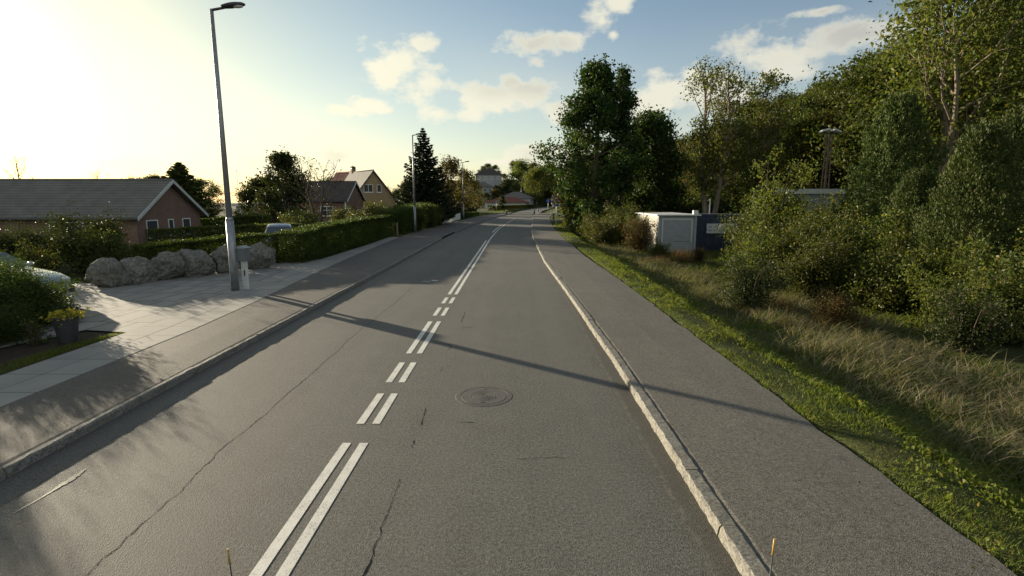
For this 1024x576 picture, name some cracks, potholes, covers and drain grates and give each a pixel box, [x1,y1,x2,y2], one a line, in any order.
crack [86,295,404,576]
manhole cover [455,386,513,407]
